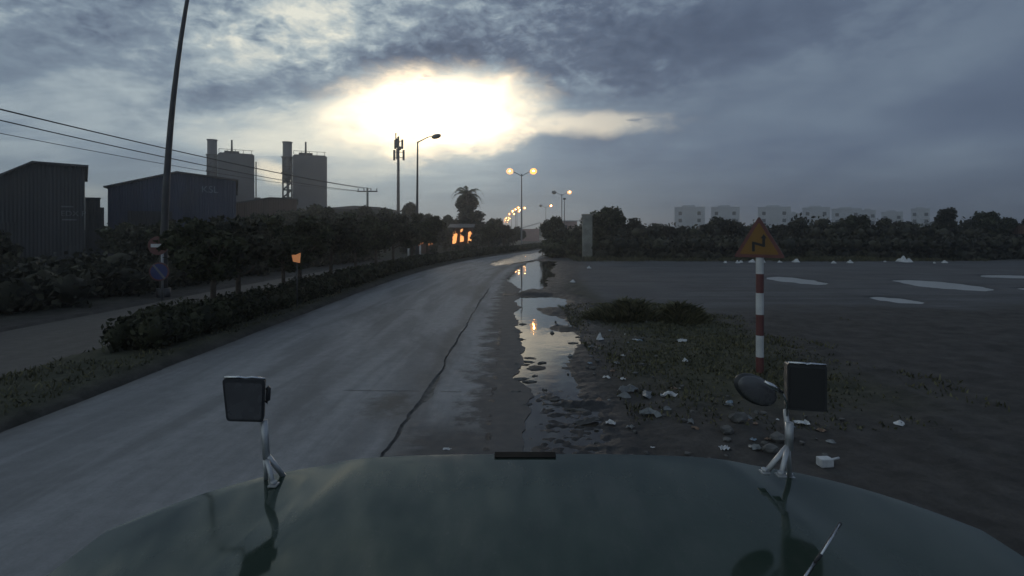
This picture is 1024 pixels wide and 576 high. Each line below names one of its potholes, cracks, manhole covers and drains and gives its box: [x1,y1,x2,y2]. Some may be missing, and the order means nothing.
crack [354,289,489,457]
